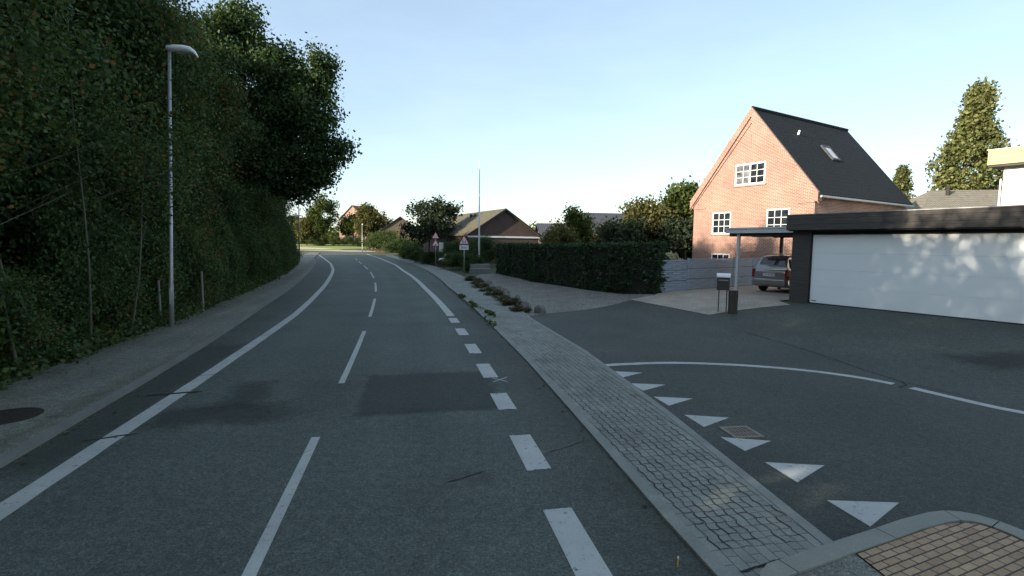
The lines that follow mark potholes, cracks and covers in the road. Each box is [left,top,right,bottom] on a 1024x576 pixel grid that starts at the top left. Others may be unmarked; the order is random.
drain grate [718,426,765,438]
manhole cover [0,407,44,425]
